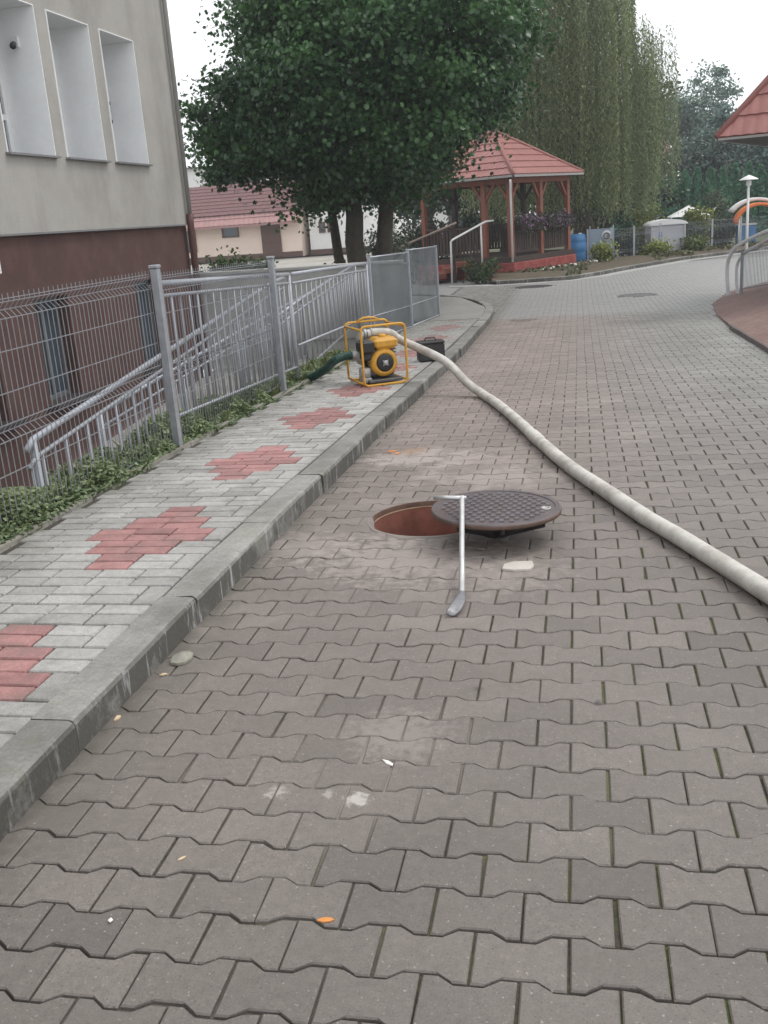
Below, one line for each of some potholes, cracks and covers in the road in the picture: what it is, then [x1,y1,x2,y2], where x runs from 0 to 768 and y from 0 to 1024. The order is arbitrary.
manhole cover [431,490,562,539]
